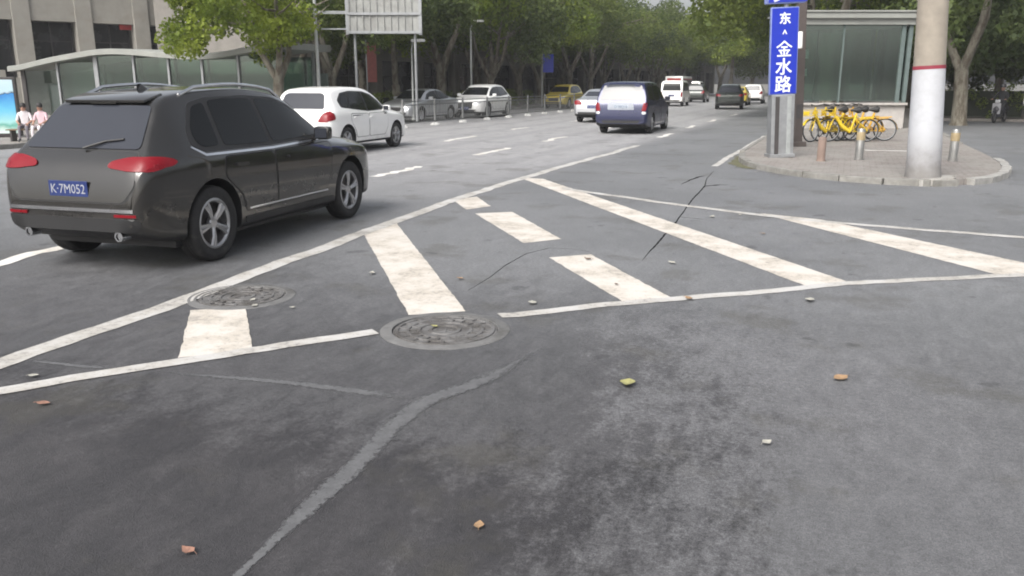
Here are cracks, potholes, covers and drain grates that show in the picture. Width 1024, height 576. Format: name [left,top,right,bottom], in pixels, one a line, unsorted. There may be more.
crack [644,171,717,258]
crack [469,248,589,290]
manhole cover [186,284,296,310]
manhole cover [380,312,510,350]
